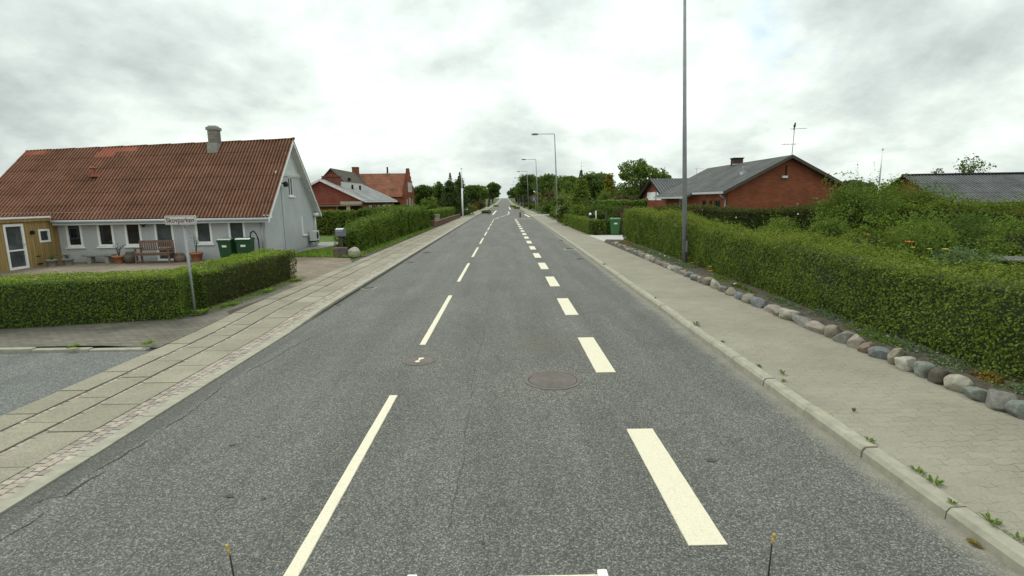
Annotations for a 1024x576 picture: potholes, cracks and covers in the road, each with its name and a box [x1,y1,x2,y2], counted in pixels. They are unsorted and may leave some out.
manhole cover [524,370,581,390]
manhole cover [402,355,437,366]
